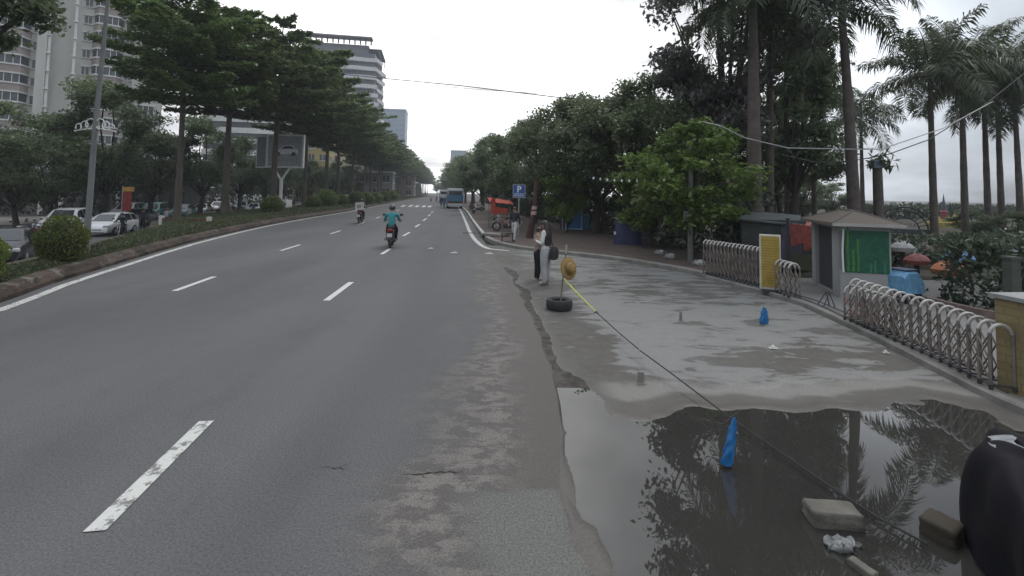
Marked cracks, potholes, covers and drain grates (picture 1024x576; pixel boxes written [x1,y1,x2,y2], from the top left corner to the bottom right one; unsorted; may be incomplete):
crack [504,267,589,388]
